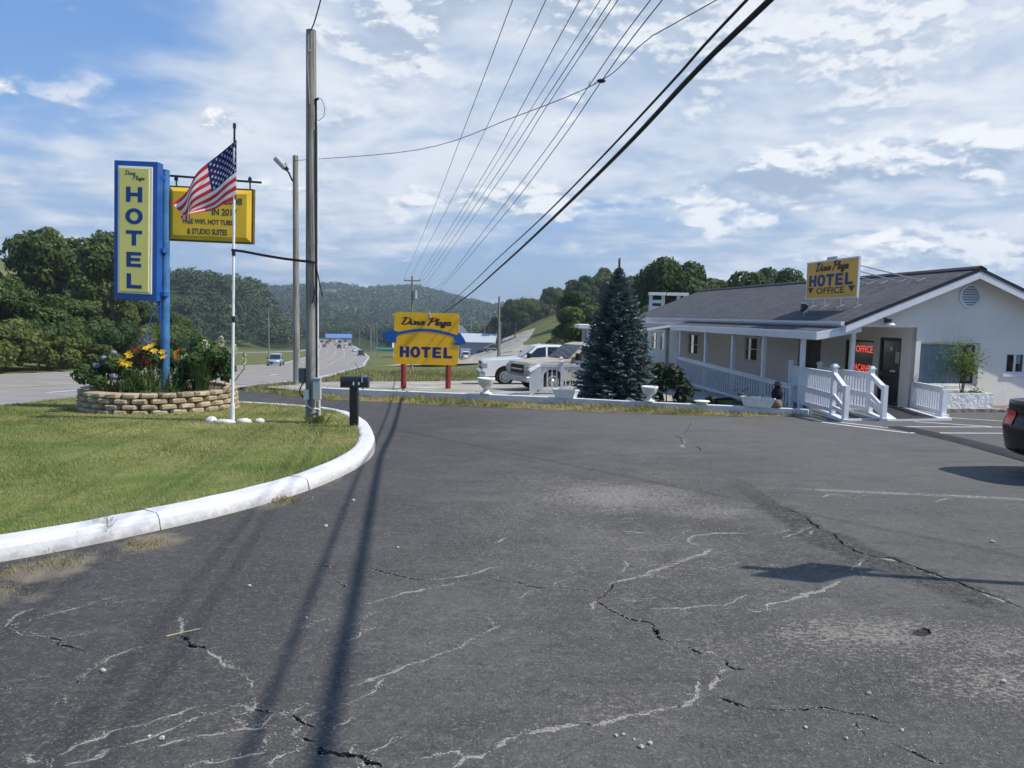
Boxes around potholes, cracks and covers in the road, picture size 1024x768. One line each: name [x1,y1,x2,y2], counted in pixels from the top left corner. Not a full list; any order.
crack [0,595,153,706]
crack [296,494,1024,768]
crack [22,615,502,768]
crack [676,424,702,458]
pothole [912,628,932,637]
